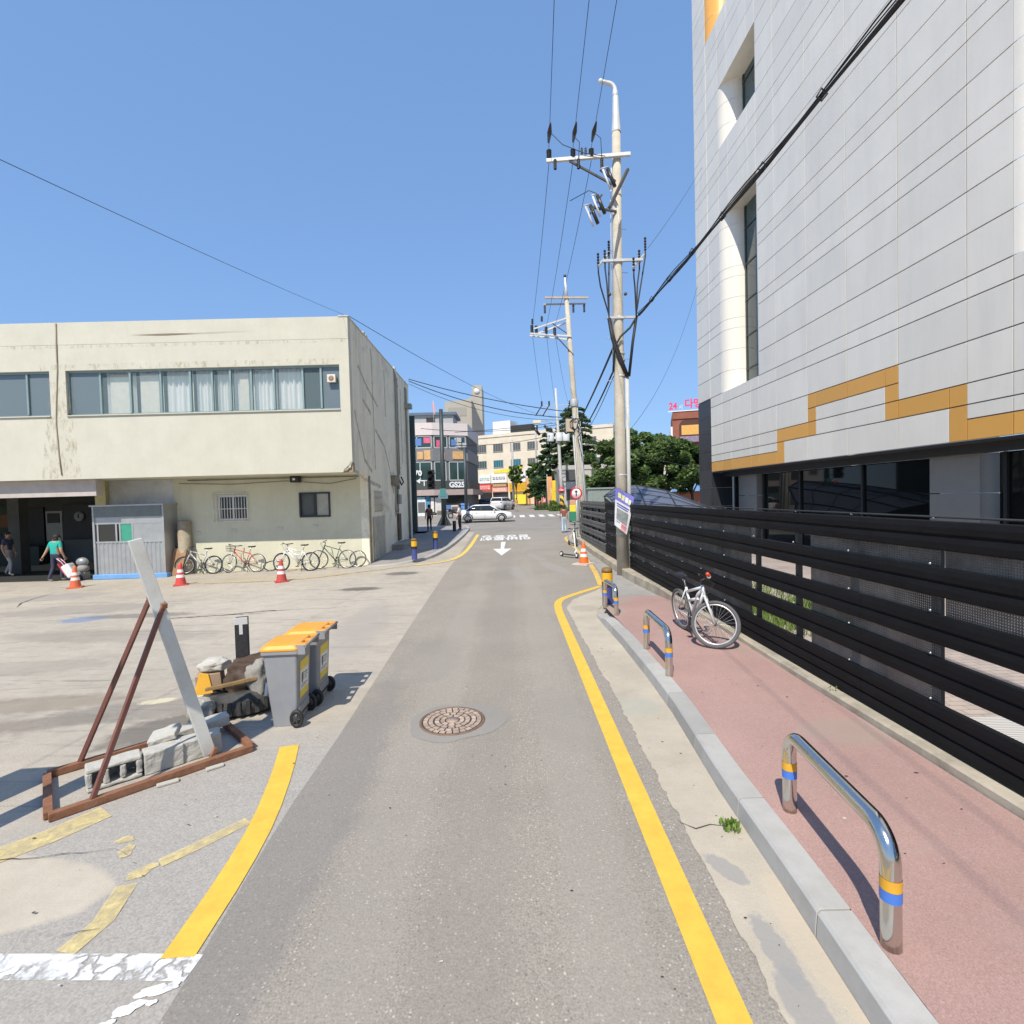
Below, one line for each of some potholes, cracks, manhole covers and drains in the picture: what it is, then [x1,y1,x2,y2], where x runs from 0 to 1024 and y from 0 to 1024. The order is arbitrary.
manhole cover [410,704,509,743]
crack [0,848,126,860]
